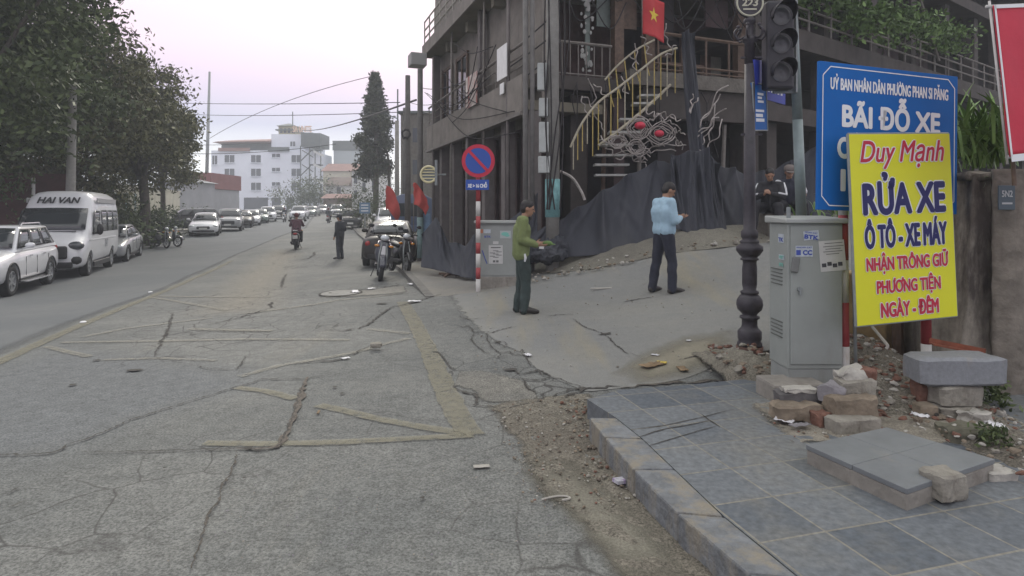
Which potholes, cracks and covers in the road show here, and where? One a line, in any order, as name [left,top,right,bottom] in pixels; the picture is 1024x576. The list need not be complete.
crack [432,325,613,407]
crack [139,314,173,357]
crack [0,346,369,568]
crack [551,314,639,356]
